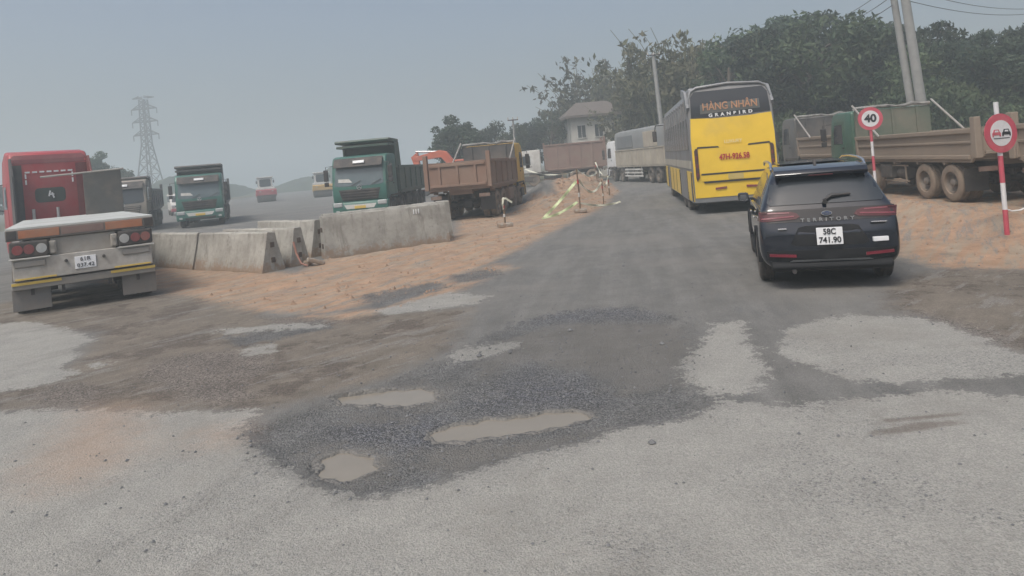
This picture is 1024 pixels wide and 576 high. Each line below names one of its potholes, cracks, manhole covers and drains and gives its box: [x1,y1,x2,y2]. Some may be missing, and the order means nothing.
pothole [309,448,387,485]
pothole [324,386,442,409]
pothole [423,408,598,445]
